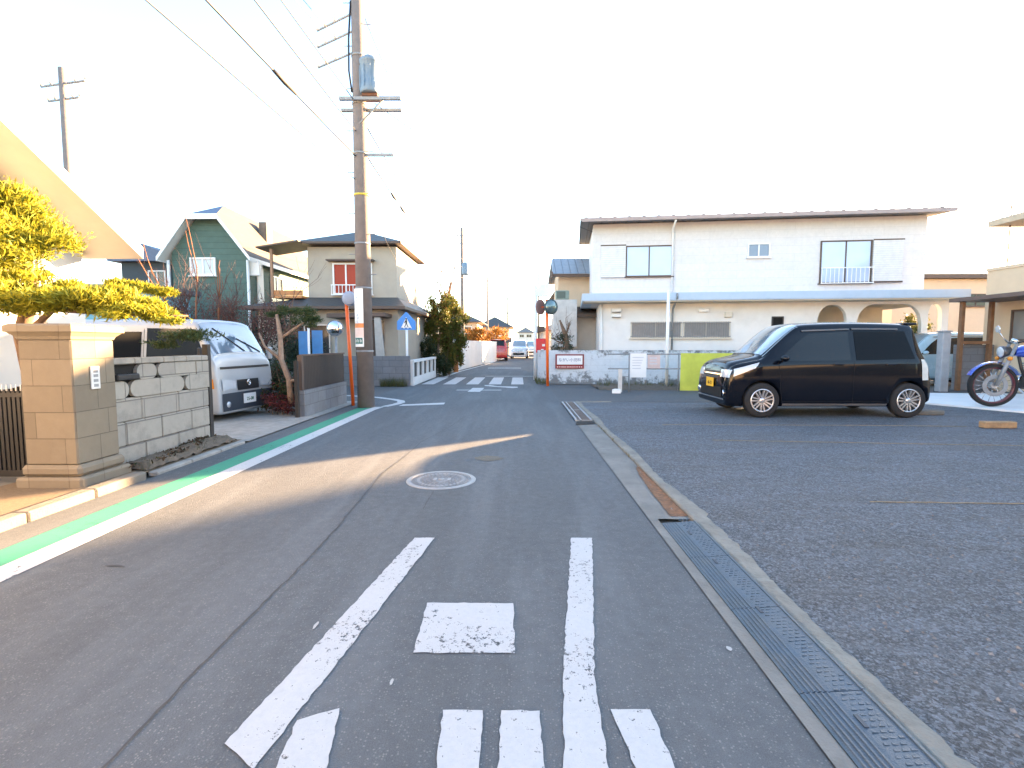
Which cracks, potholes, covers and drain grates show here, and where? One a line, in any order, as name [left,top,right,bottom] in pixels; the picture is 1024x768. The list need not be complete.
manhole cover [406,471,476,490]
drain grate [568,409,593,421]
drain grate [562,402,581,410]
